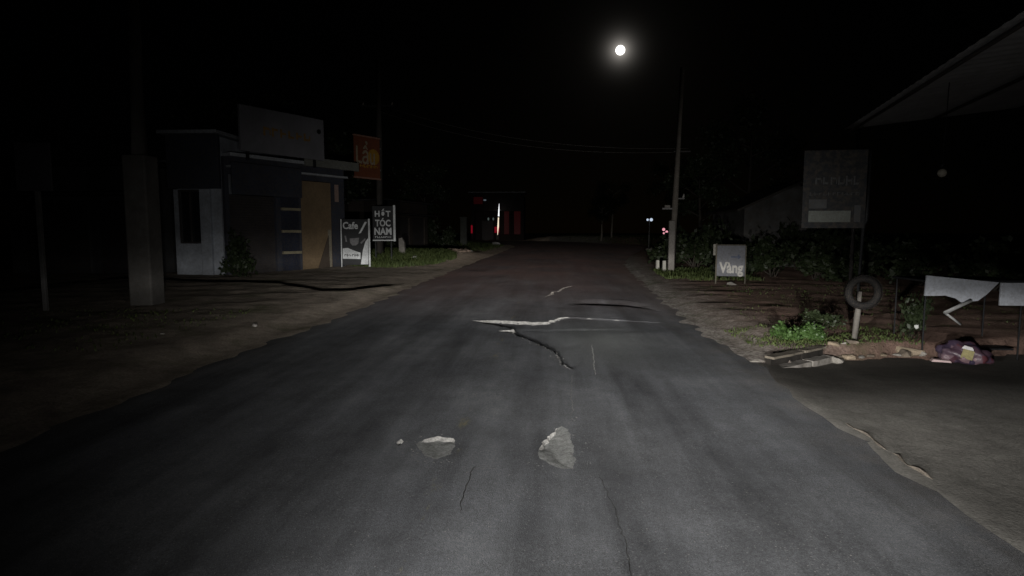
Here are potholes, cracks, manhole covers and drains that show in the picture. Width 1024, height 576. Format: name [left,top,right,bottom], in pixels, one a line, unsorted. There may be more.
crack [460,466,506,511]
